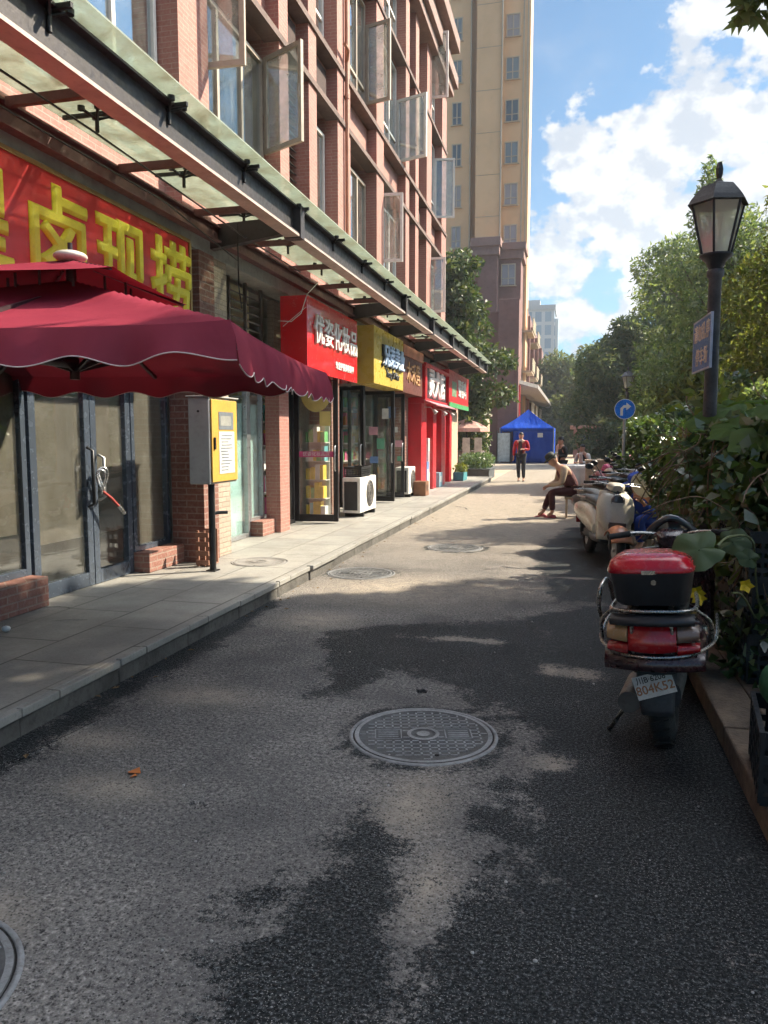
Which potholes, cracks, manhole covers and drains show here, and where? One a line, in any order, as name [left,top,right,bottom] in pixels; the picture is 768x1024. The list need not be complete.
manhole cover [427,544,483,552]
manhole cover [327,567,395,580]
manhole cover [231,557,289,567]
manhole cover [349,708,498,766]
